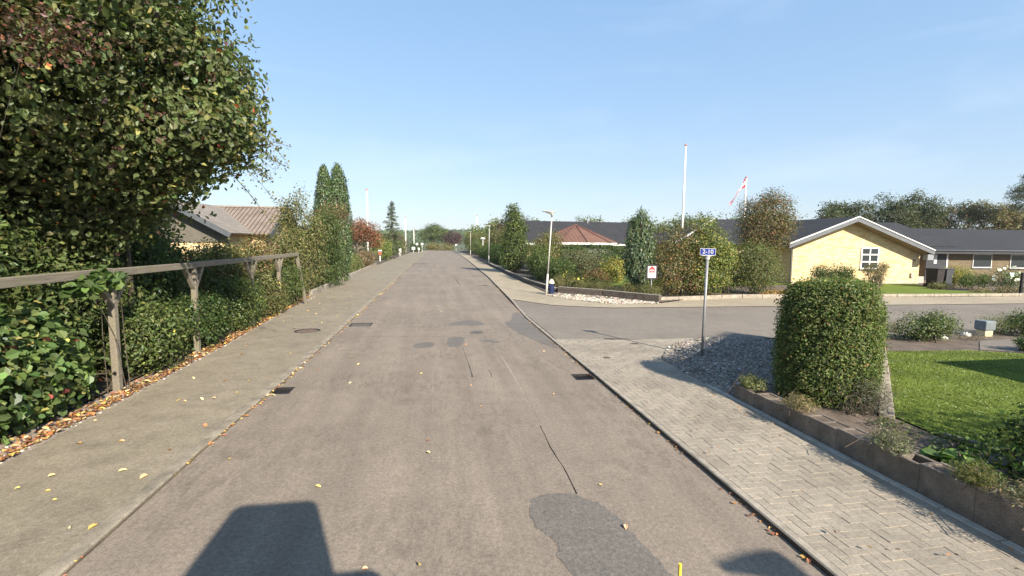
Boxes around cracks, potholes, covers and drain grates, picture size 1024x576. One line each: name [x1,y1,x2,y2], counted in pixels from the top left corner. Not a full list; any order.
crack [462,343,533,409]
crack [540,426,577,494]
